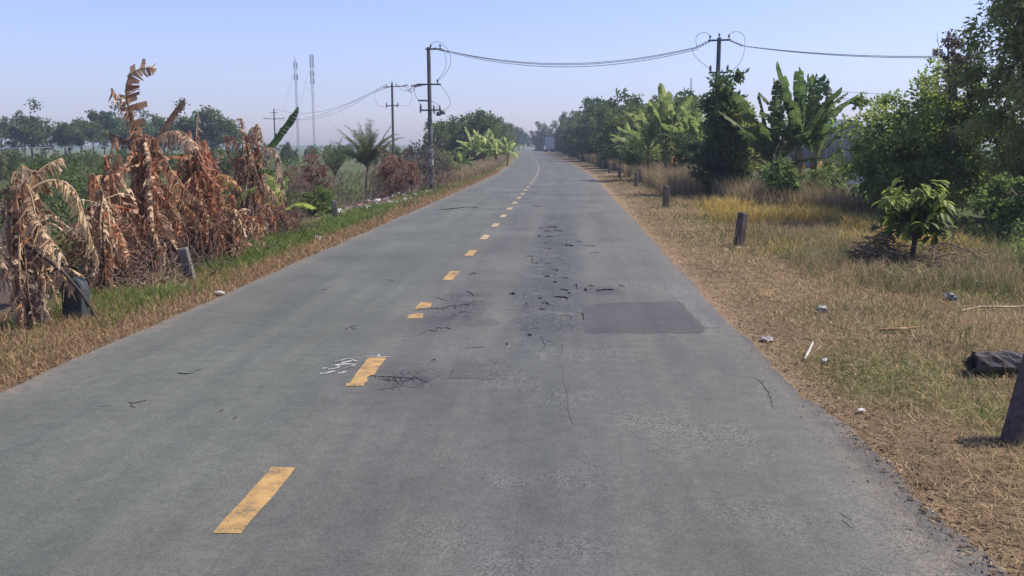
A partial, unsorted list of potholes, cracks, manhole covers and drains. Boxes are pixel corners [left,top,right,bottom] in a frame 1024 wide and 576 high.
crack [403,292,475,337]
crack [368,376,426,389]
